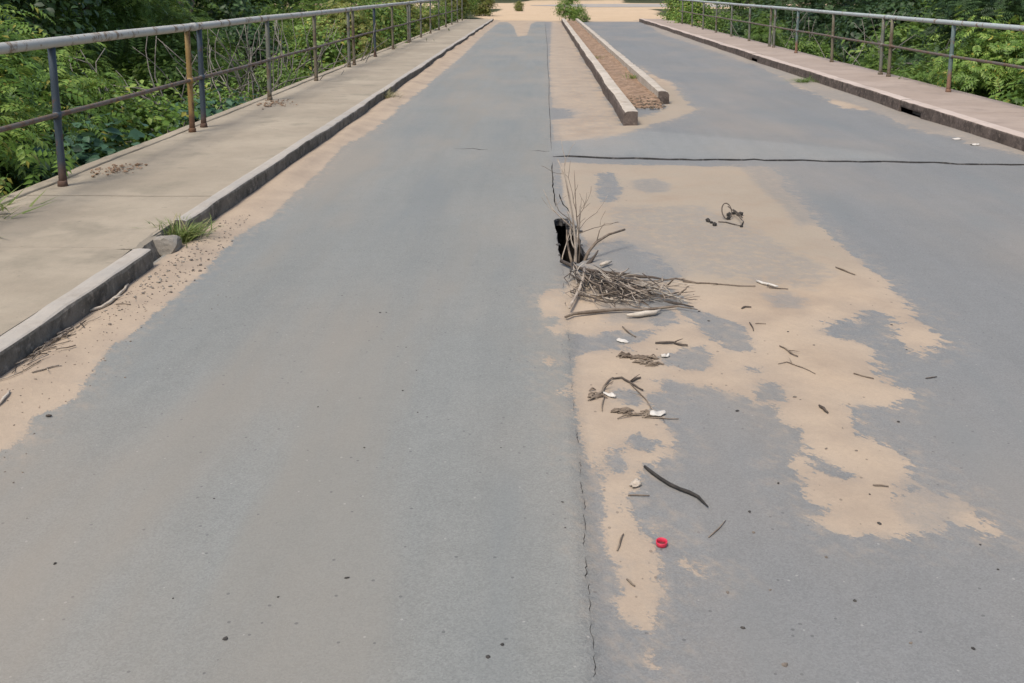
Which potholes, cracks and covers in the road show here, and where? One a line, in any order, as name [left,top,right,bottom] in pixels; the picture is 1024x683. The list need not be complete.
pothole [554,218,590,264]
